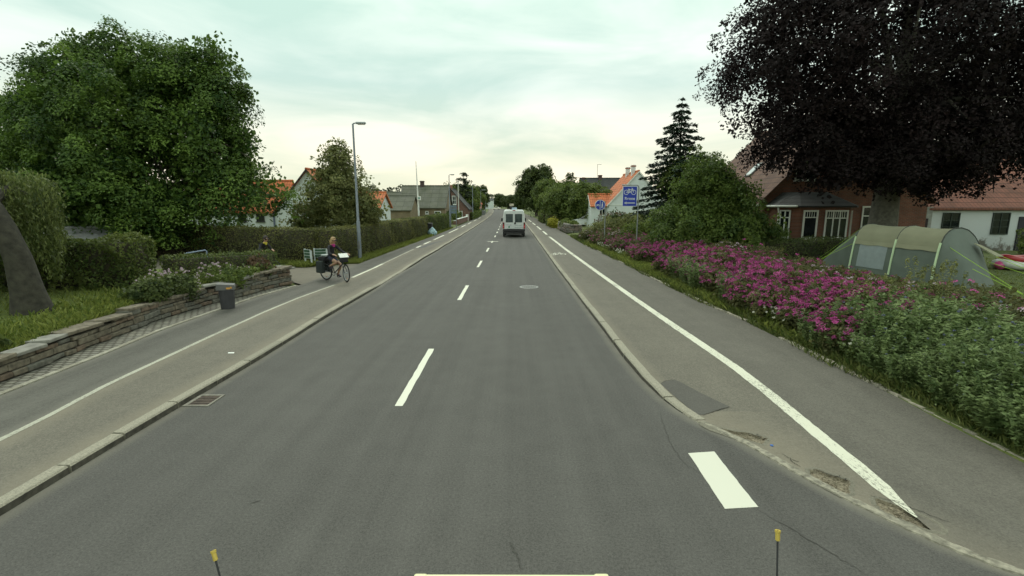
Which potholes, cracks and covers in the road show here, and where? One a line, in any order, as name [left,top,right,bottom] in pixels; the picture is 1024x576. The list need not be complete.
pothole [804,467,856,498]
drain grate [182,394,225,407]
pothole [869,496,948,535]
pothole [699,422,772,446]
